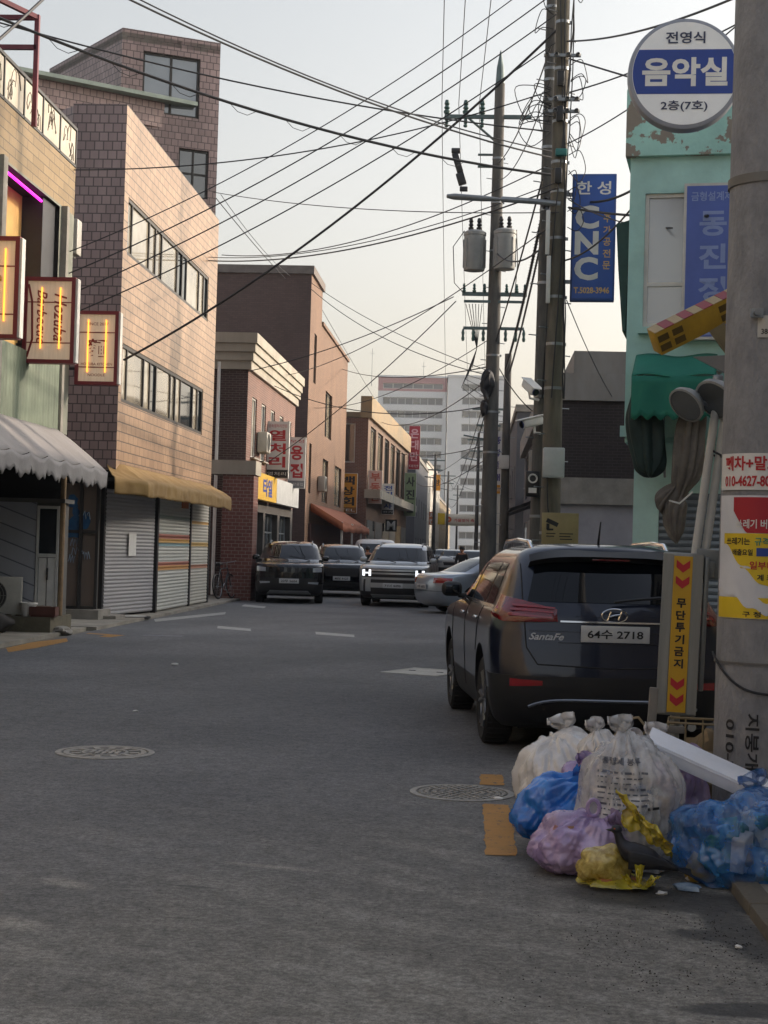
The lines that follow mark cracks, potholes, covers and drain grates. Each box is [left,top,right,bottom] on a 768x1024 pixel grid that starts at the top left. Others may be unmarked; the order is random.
manhole cover [381,667,447,676]
manhole cover [410,784,515,802]
manhole cover [55,745,155,760]
